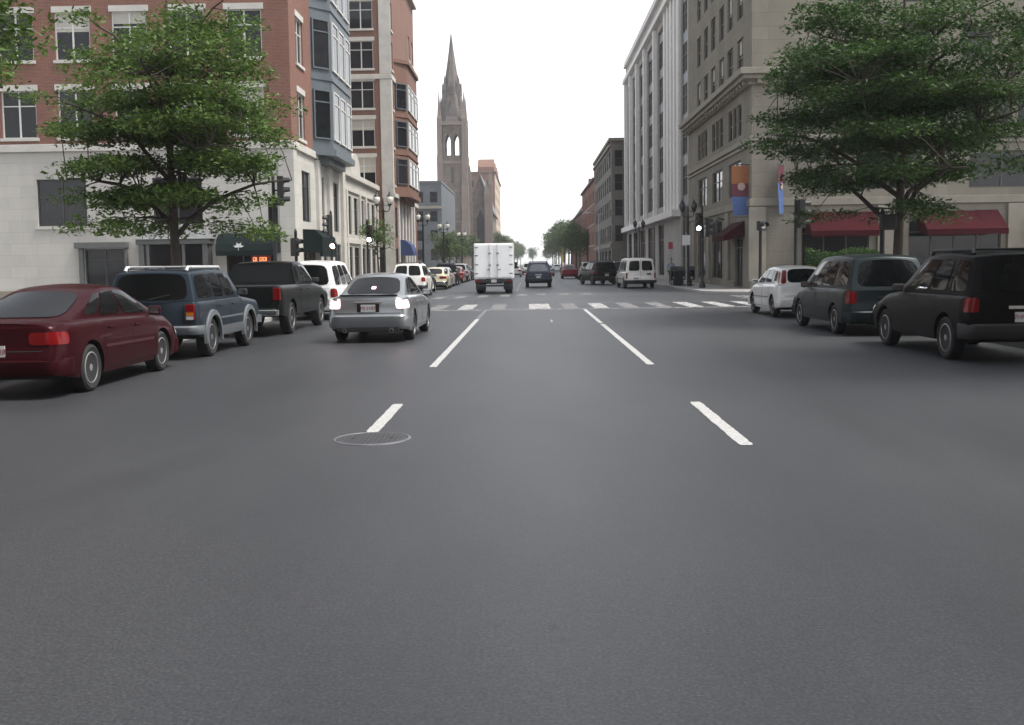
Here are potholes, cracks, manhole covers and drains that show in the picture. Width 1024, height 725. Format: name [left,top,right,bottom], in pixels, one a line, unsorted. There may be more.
manhole cover [333,432,411,446]
